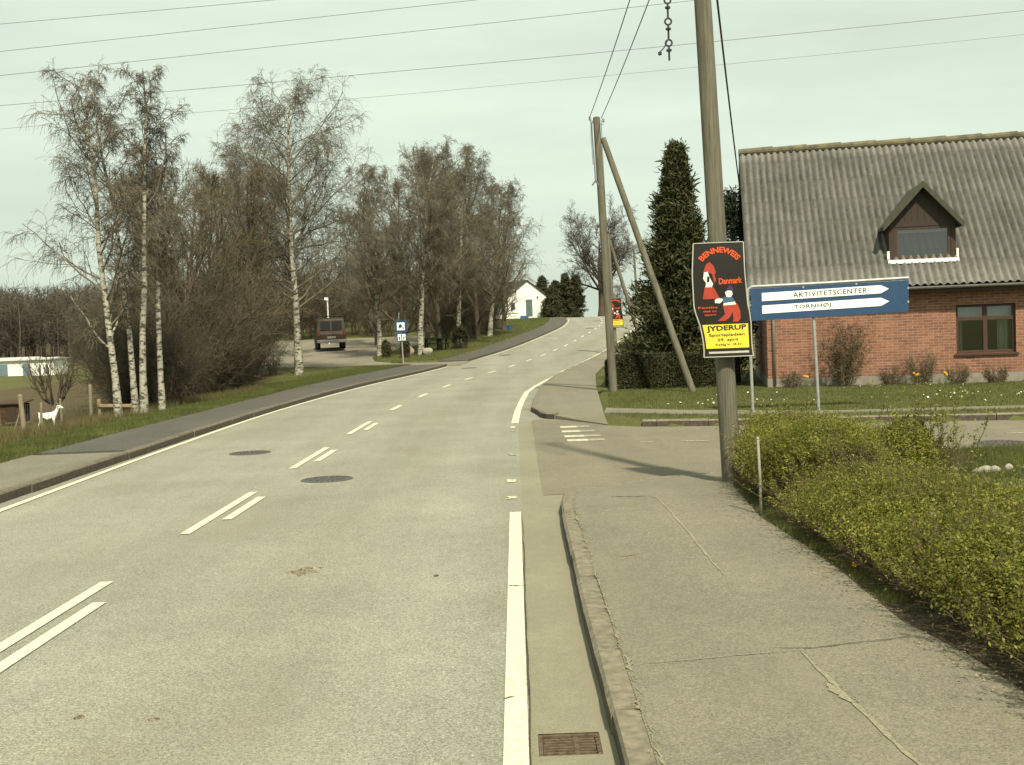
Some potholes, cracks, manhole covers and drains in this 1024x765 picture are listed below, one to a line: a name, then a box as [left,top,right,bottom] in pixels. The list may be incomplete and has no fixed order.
manhole cover [301,475,353,483]
pothole [286,567,325,577]
drain grate [538,733,603,756]
